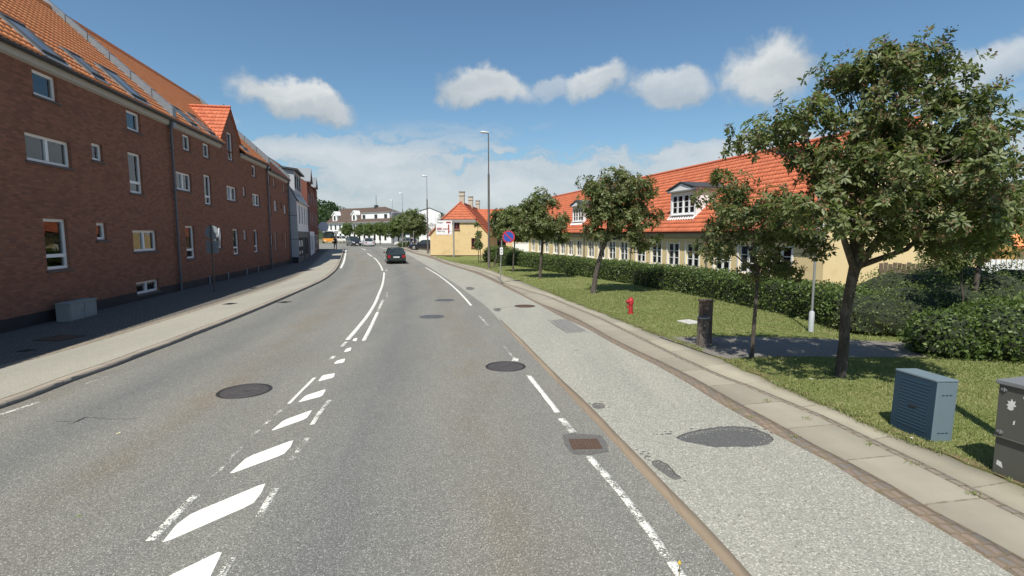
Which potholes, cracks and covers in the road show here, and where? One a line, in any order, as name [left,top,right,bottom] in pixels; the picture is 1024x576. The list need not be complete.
manhole cover [485,361,526,372]
manhole cover [216,383,273,399]
drain grate [569,438,603,449]
